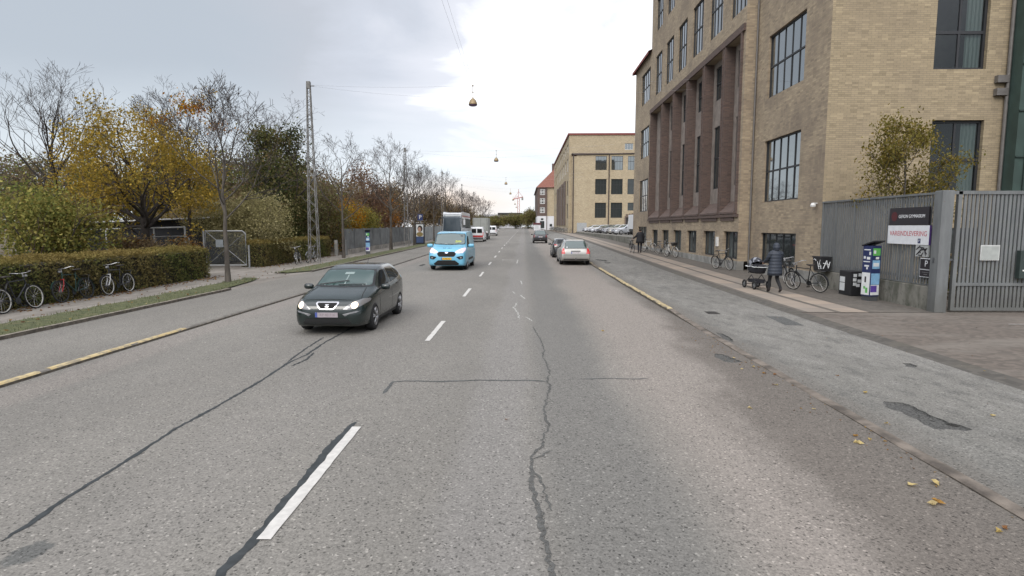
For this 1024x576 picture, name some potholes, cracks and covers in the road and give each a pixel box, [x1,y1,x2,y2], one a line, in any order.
crack [512,281,556,576]
